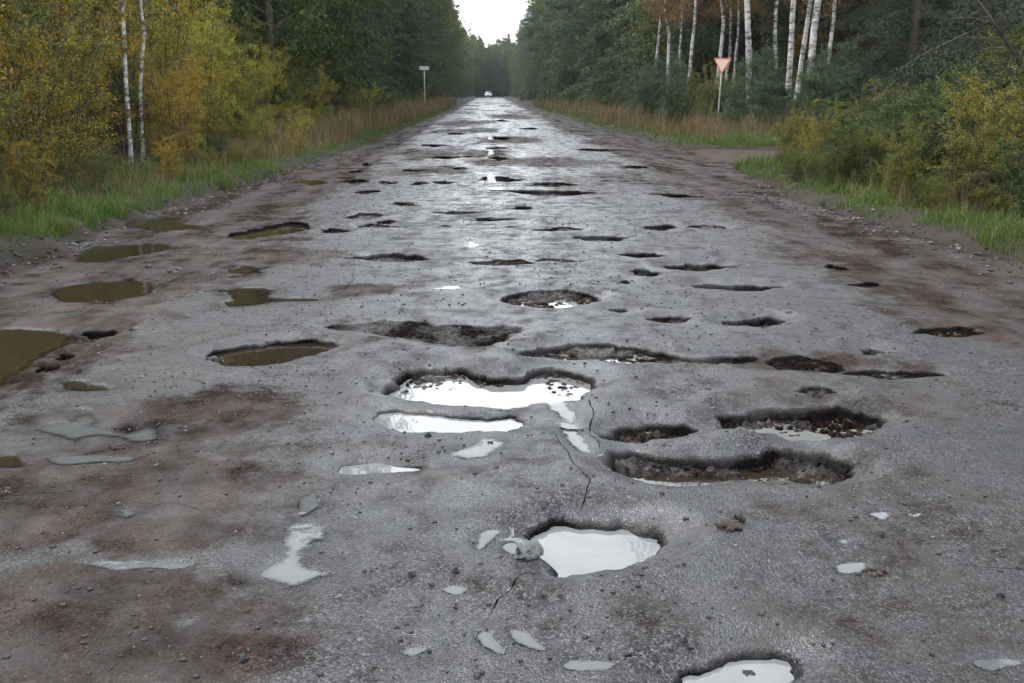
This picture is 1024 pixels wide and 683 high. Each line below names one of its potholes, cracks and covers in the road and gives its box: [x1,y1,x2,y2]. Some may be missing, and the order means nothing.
pothole [905,325,988,338]
pothole [500,289,601,308]
pothole [599,447,857,487]
pothole [54,352,77,361]
pothole [516,342,762,364]
crack [491,572,530,612]
pothole [761,354,847,374]
pothole [379,366,597,409]
pothole [523,513,669,578]
pothole [226,221,311,240]
pothole [370,407,529,433]
pothole [712,405,891,441]
